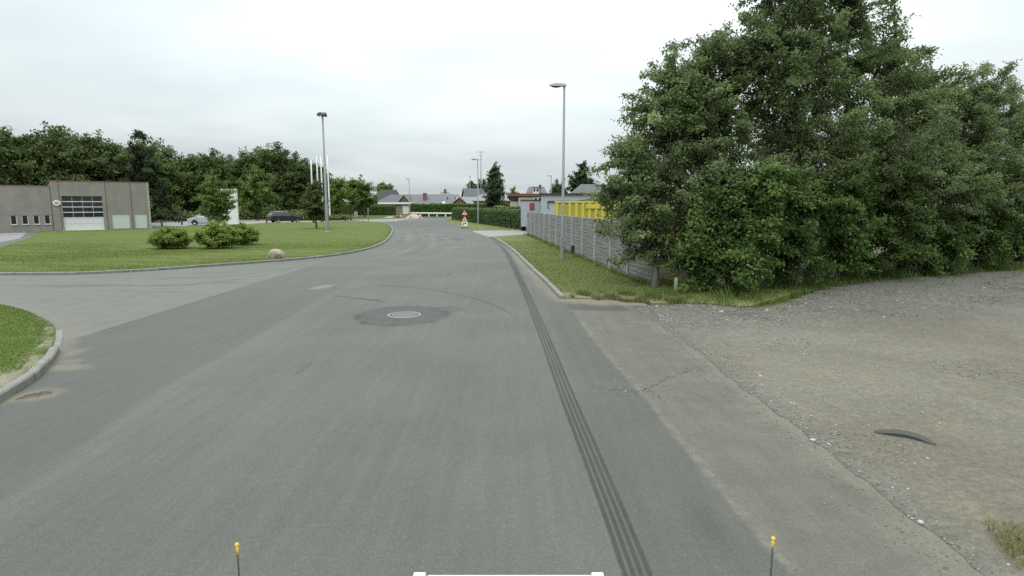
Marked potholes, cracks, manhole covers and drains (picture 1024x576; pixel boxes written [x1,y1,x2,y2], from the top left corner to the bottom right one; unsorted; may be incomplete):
crack [596,370,707,403]
